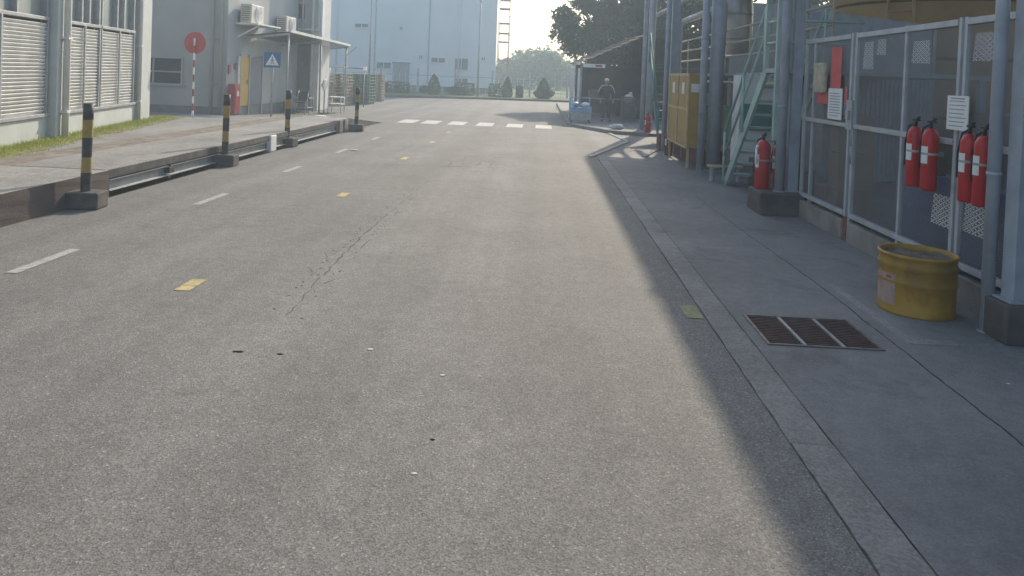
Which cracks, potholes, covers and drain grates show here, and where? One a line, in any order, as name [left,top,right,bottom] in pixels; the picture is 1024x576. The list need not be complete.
crack [273,173,440,319]
drain grate [742,314,886,351]
